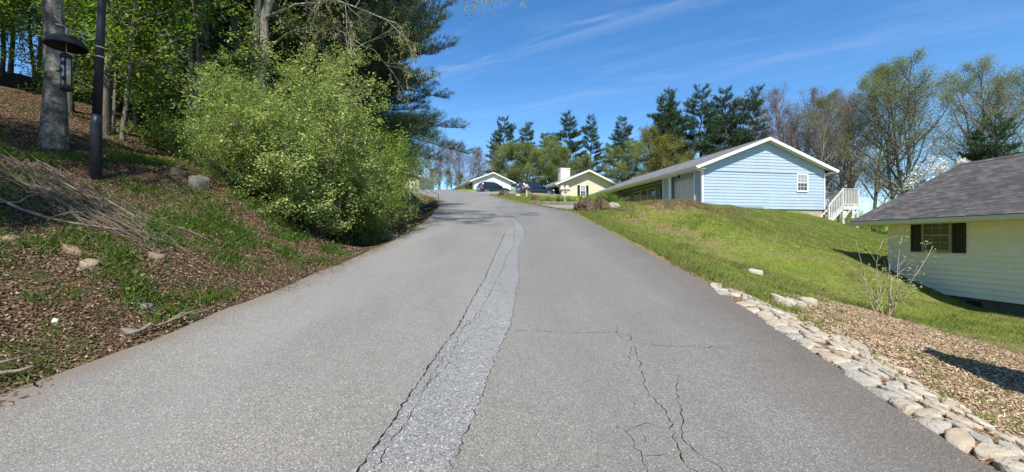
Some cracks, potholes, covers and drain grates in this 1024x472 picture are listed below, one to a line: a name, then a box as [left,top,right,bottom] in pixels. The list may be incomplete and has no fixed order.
crack [519,327,725,472]
